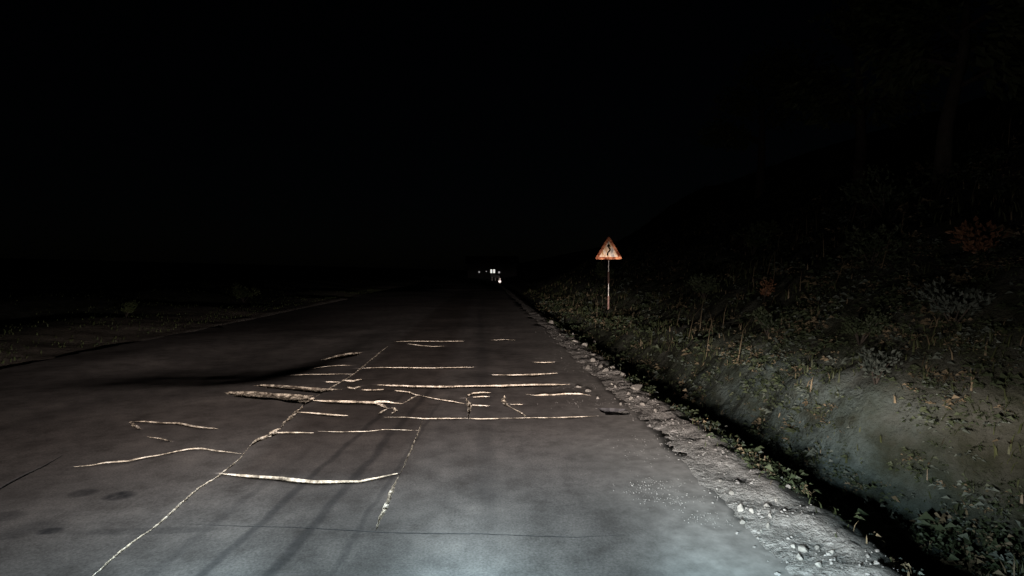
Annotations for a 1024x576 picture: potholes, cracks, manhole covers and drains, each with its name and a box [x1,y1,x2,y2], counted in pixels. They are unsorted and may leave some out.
crack [0,341,615,576]
